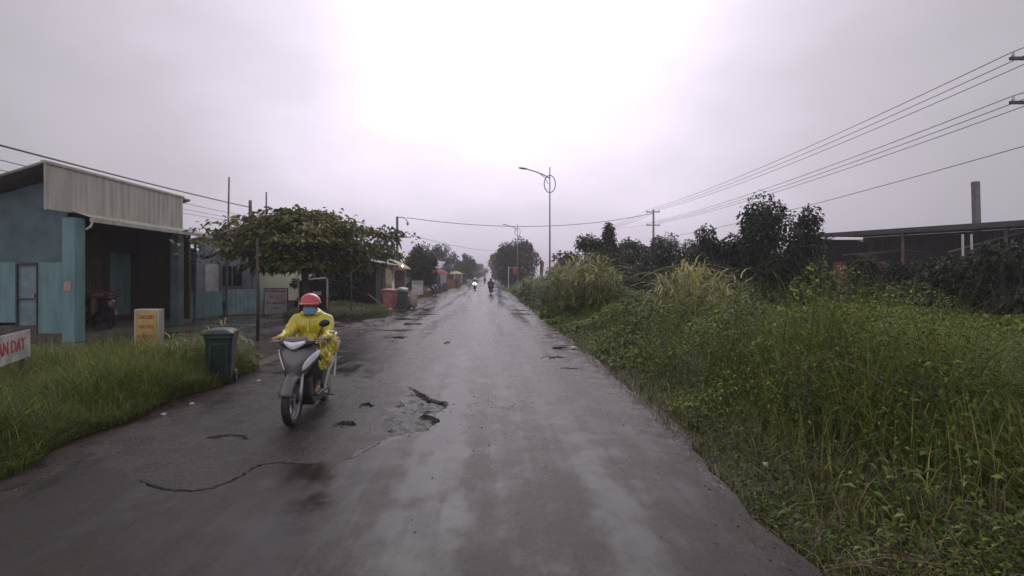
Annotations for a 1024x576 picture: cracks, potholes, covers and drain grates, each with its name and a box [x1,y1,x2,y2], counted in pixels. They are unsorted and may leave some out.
crack [139,462,302,492]
pothole [382,385,449,435]
